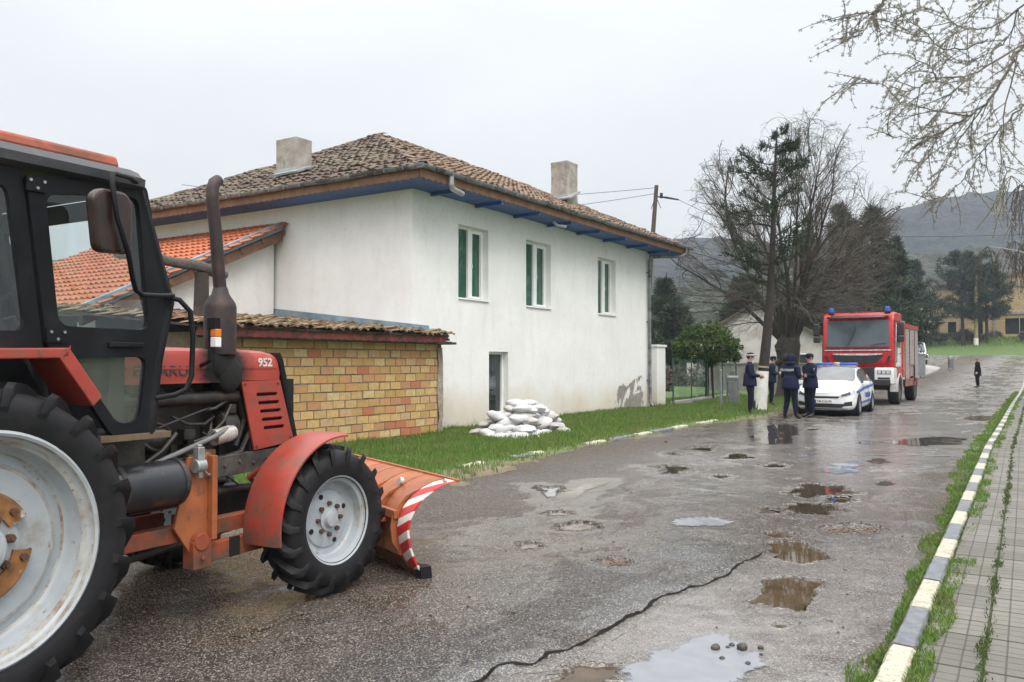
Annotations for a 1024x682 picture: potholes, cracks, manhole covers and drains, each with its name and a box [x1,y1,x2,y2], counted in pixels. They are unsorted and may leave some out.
crack [432,549,778,682]
pothole [779,481,867,499]
pothole [531,485,566,498]
pothole [720,452,761,460]
pothole [761,539,840,565]
pothole [815,521,889,534]
pothole [744,574,828,614]
pothole [650,464,699,475]
pothole [513,540,548,550]
pothole [768,500,853,518]
pothole [547,519,605,532]
pothole [592,555,634,566]
